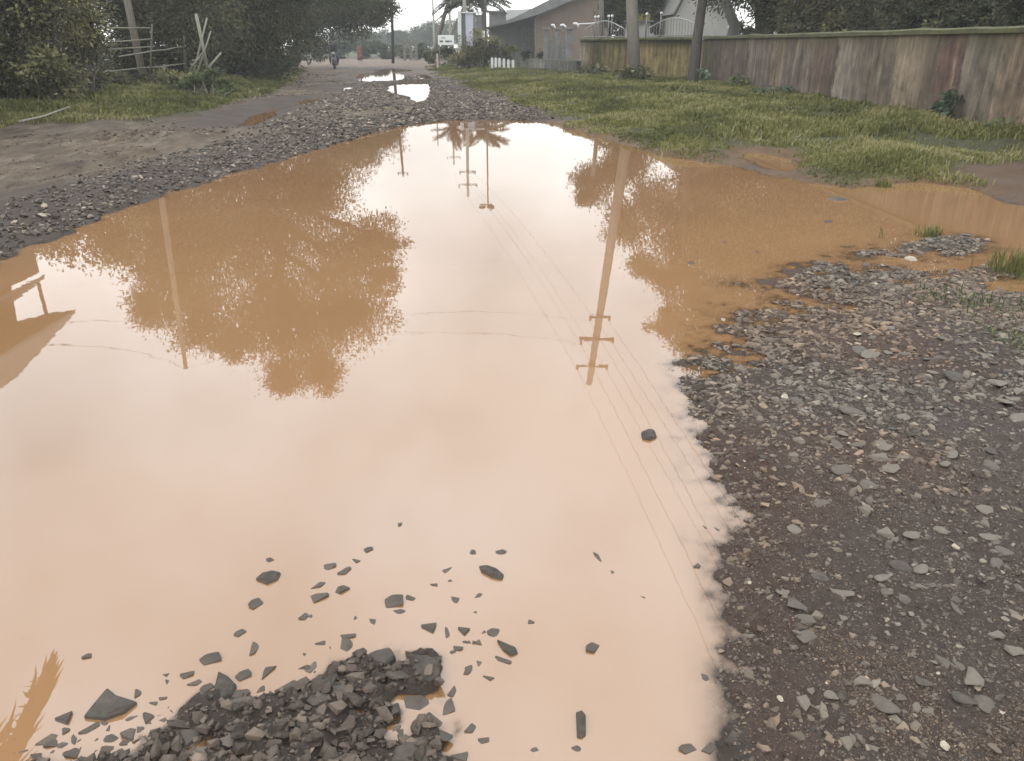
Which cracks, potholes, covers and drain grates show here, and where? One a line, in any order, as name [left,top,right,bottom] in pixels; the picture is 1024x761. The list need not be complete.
pothole [356,72,407,82]
pothole [387,82,431,102]
